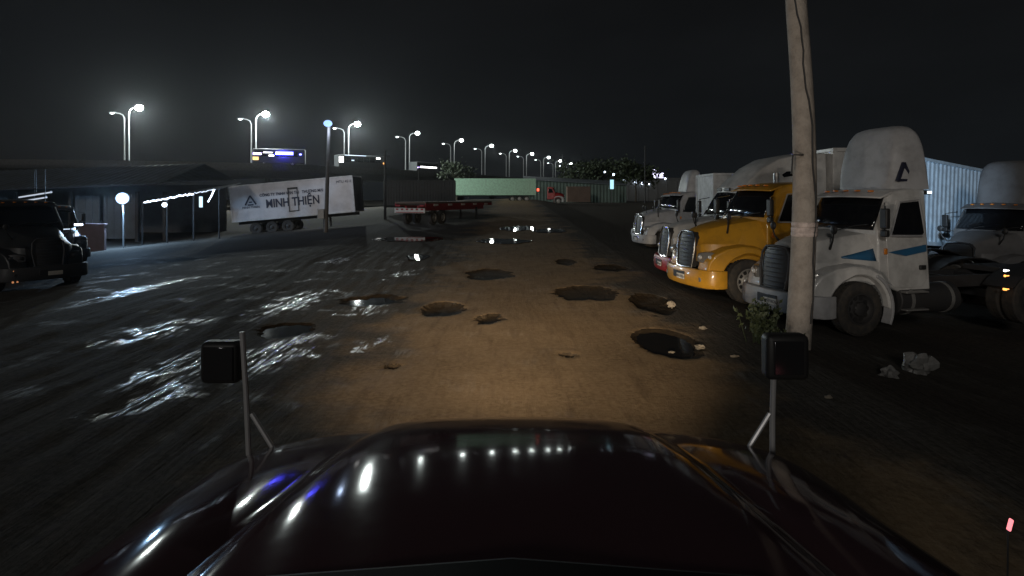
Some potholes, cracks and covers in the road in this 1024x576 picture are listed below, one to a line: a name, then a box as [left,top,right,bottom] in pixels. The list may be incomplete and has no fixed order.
pothole [405,300,480,320]
pothole [547,258,585,267]
pothole [614,291,688,318]
pothole [325,292,421,309]
pothole [615,325,721,365]
pothole [456,267,524,282]
pothole [539,284,635,303]
pothole [460,311,522,328]
pothole [585,263,638,273]
pothole [238,319,333,343]
